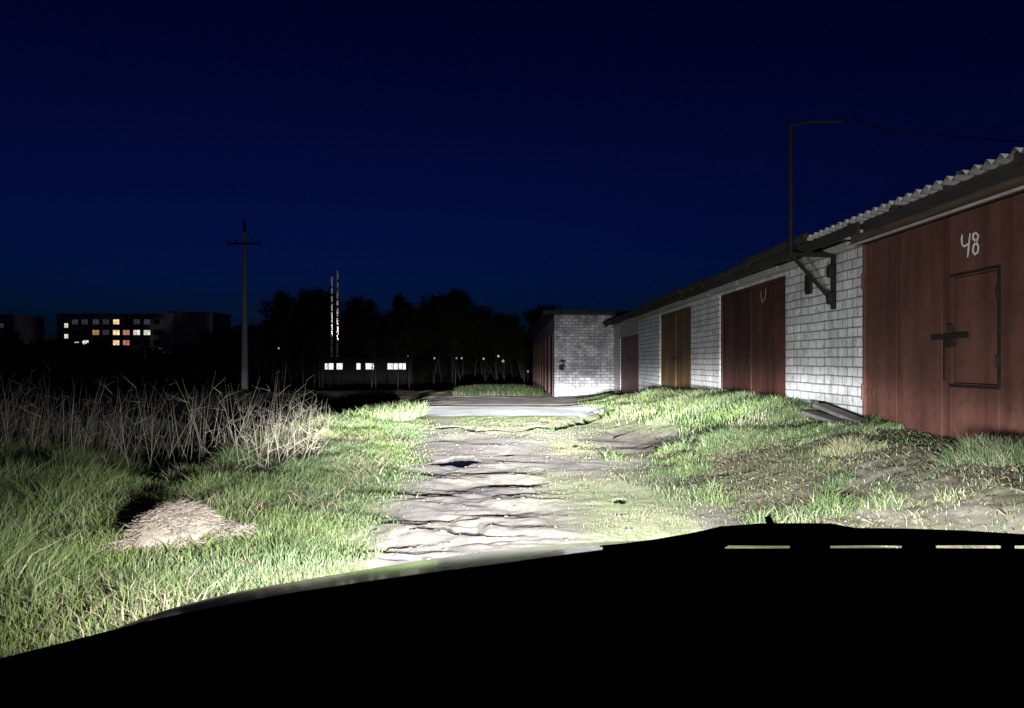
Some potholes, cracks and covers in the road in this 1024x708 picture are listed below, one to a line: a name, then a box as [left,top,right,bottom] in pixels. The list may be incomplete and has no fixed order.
pothole [427,455,483,468]
crack [352,516,534,560]
crack [483,482,553,517]
